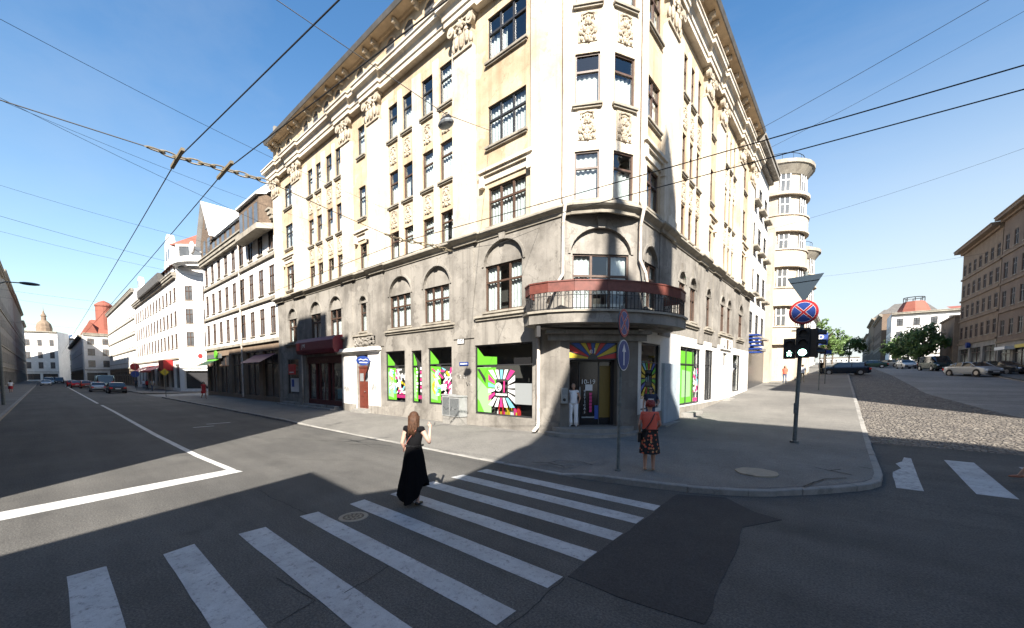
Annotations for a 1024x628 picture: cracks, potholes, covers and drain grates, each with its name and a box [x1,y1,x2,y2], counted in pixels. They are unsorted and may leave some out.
manhole cover [735,467,779,478]
crack [805,467,871,486]
crack [276,577,315,624]
manhole cover [338,512,368,522]
